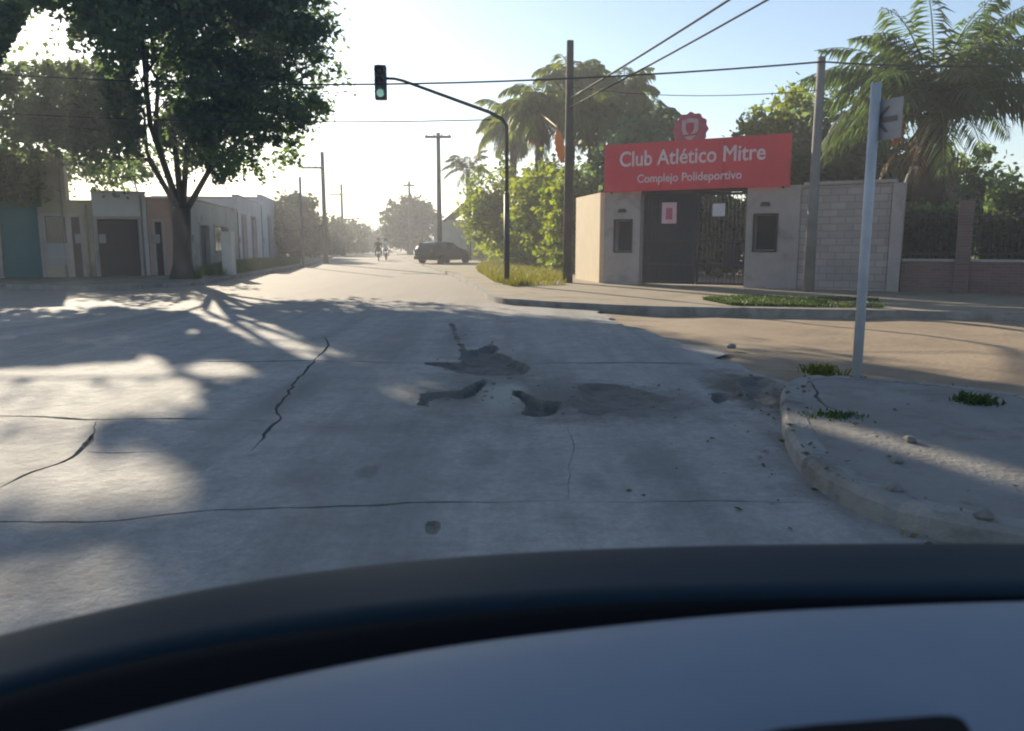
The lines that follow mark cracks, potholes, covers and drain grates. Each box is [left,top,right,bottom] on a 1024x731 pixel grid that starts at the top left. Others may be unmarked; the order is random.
pothole [512,390,564,417]
pothole [416,378,488,406]
pothole [424,323,530,376]
crack [251,337,330,451]
crack [0,422,137,488]
